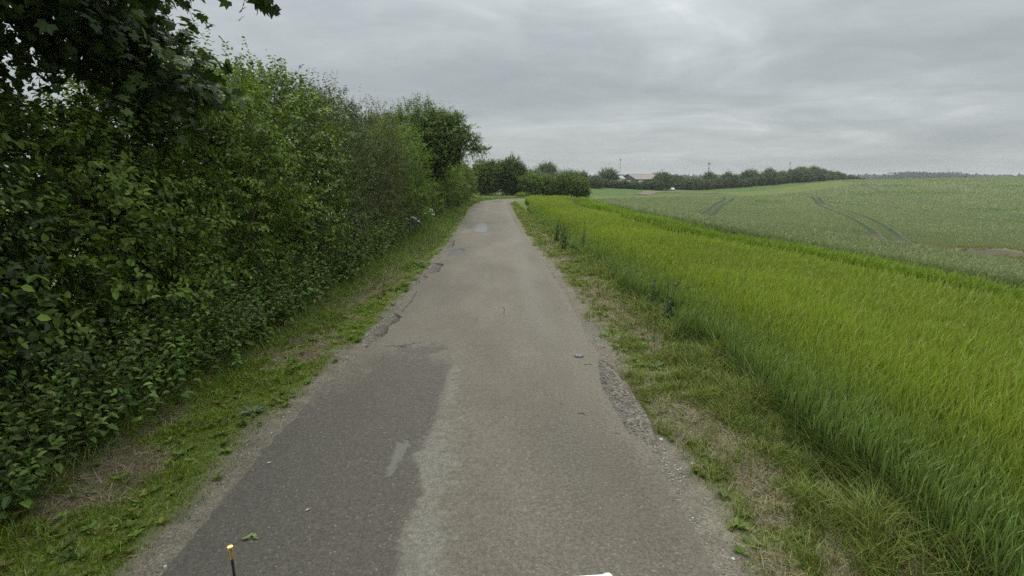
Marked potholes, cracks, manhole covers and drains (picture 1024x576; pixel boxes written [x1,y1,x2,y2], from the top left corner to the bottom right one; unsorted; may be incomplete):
pothole [361,313,402,347]
pothole [597,358,657,450]
pothole [422,263,444,275]
